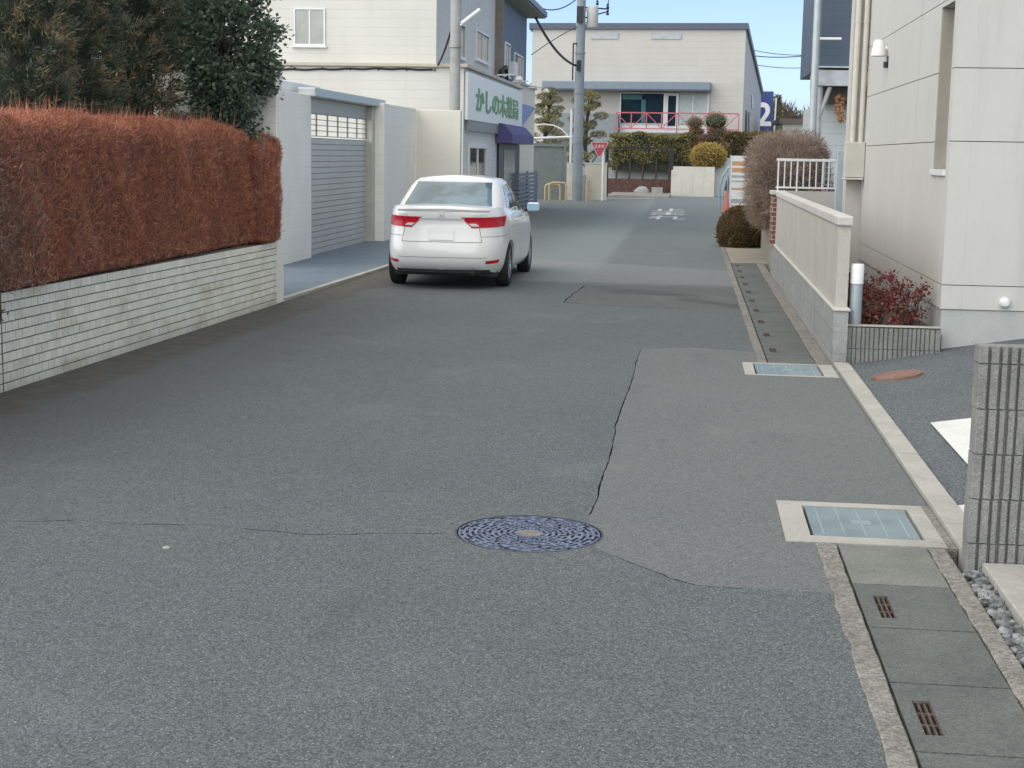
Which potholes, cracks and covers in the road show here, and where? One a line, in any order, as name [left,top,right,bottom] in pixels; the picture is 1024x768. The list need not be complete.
manhole cover [455,515,604,552]
manhole cover [871,370,923,381]
crack [22,520,442,535]
crack [589,350,641,515]
